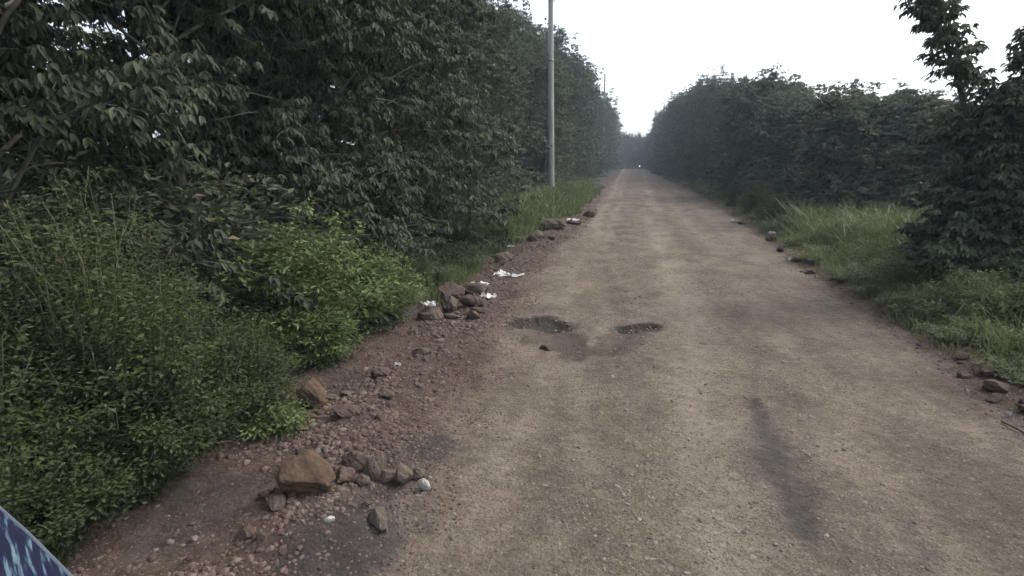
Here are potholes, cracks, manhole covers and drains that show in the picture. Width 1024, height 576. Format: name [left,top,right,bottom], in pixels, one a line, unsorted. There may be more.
pothole [615,323,663,334]
pothole [502,316,574,335]
